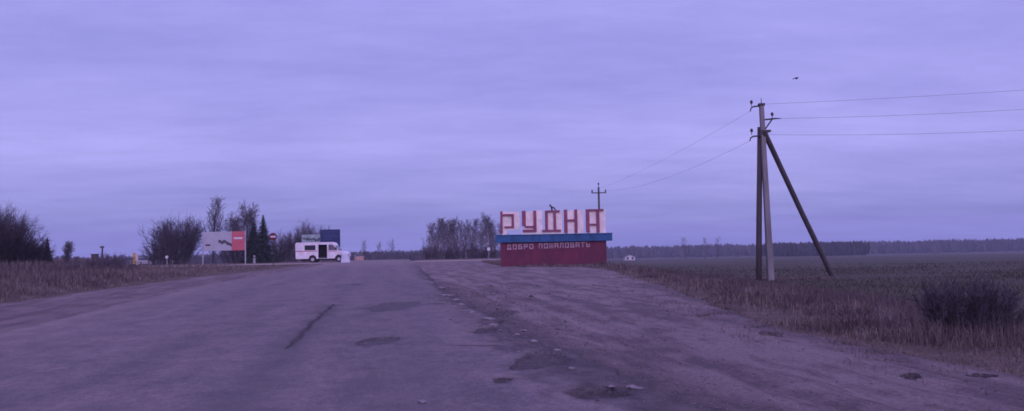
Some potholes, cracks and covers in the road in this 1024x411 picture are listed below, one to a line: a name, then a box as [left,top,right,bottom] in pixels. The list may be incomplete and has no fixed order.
crack [285,304,334,349]
pothole [509,351,571,370]
pothole [565,386,631,399]
